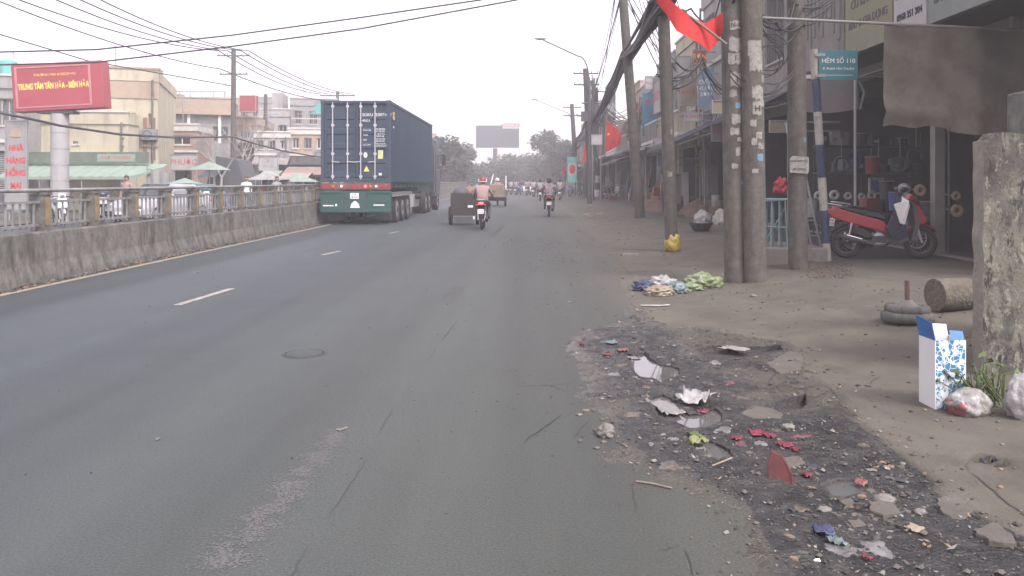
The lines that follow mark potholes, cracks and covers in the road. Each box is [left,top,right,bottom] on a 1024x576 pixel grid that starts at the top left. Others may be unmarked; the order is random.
pothole [691,439,737,460]
manhole cover [281,348,327,358]
crack [524,415,588,443]
pothole [770,393,811,412]
pothole [818,477,873,499]
crack [965,453,1024,515]
pothole [625,351,683,383]
pothole [648,393,728,430]
